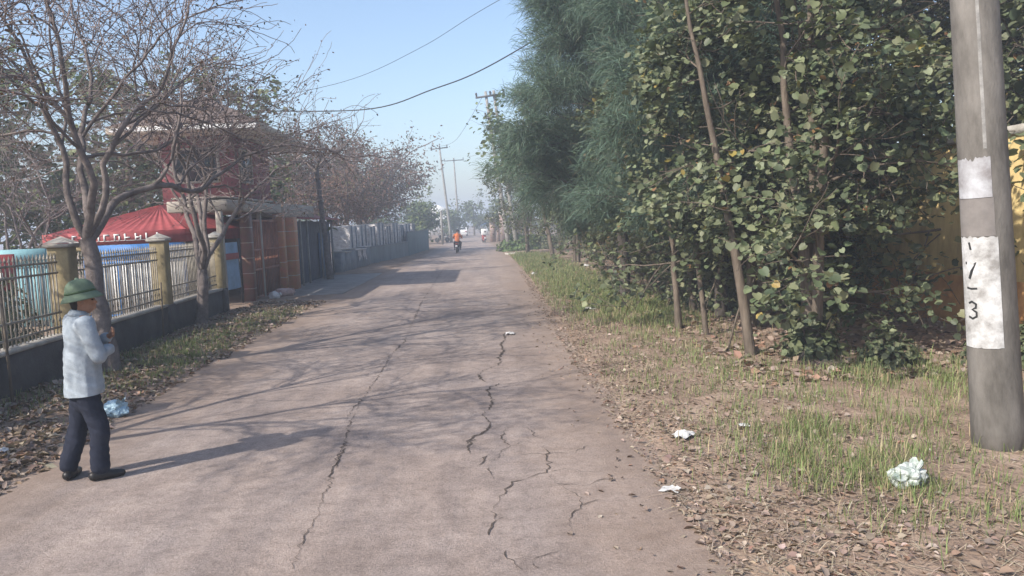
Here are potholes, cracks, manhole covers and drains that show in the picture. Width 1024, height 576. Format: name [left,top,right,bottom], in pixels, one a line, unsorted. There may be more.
crack [466,333,617,569]
